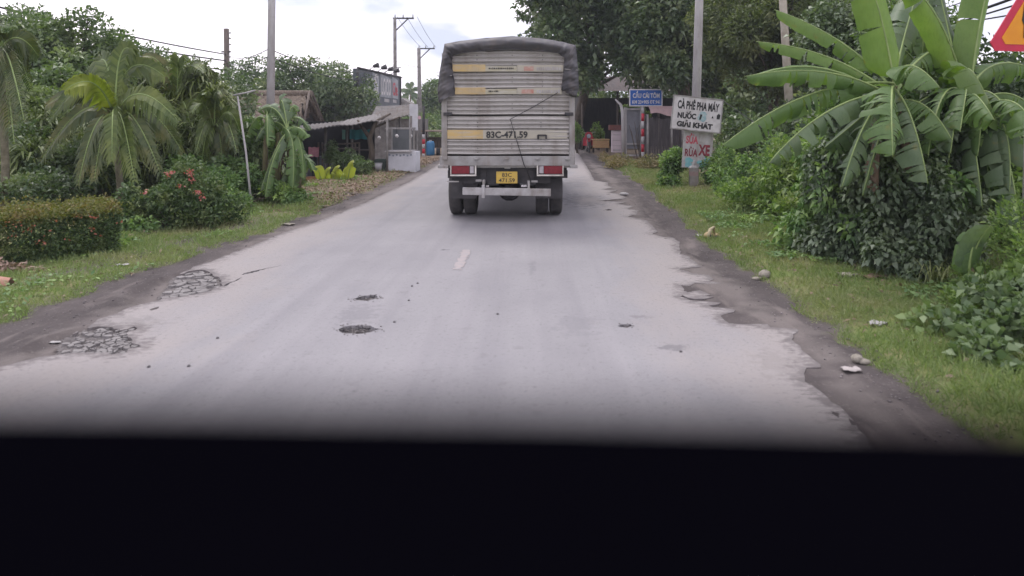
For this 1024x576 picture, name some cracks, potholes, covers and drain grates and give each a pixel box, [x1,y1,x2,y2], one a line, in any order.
pothole [332,323,385,336]
crack [156,267,272,300]
